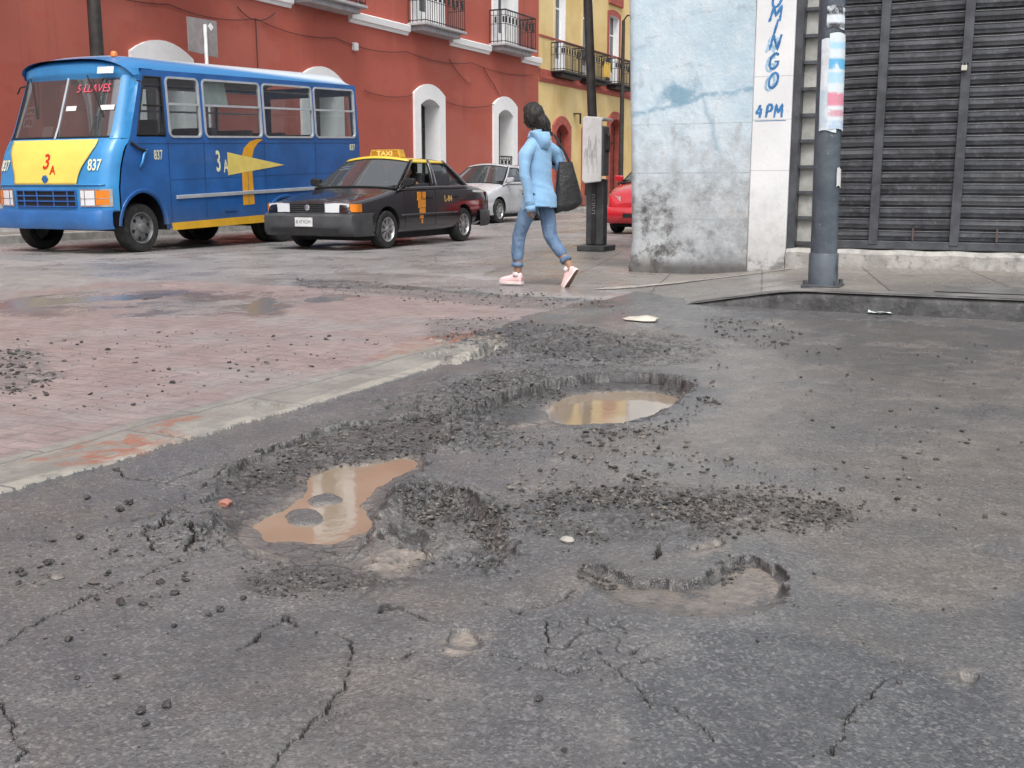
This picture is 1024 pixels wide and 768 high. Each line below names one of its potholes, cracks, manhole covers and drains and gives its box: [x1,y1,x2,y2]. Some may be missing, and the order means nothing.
crack [0,699,30,762]
pothole [577,554,791,619]
crack [271,589,713,768]
pothole [374,483,522,569]
crack [238,614,299,650]
pothole [456,371,696,429]
pothole [445,628,483,651]
pothole [199,412,455,572]
crack [827,659,909,756]
